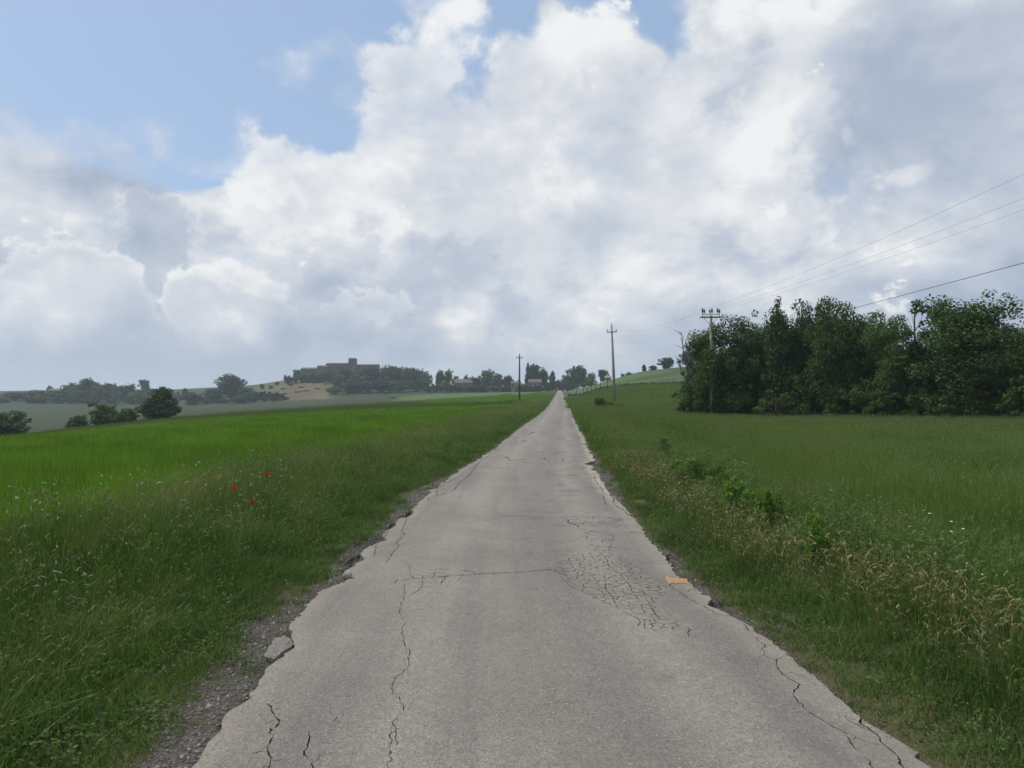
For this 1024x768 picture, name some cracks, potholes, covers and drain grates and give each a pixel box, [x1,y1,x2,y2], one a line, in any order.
crack [522,476,904,768]
crack [303,733,321,768]
crack [374,518,567,768]
crack [252,703,284,768]
